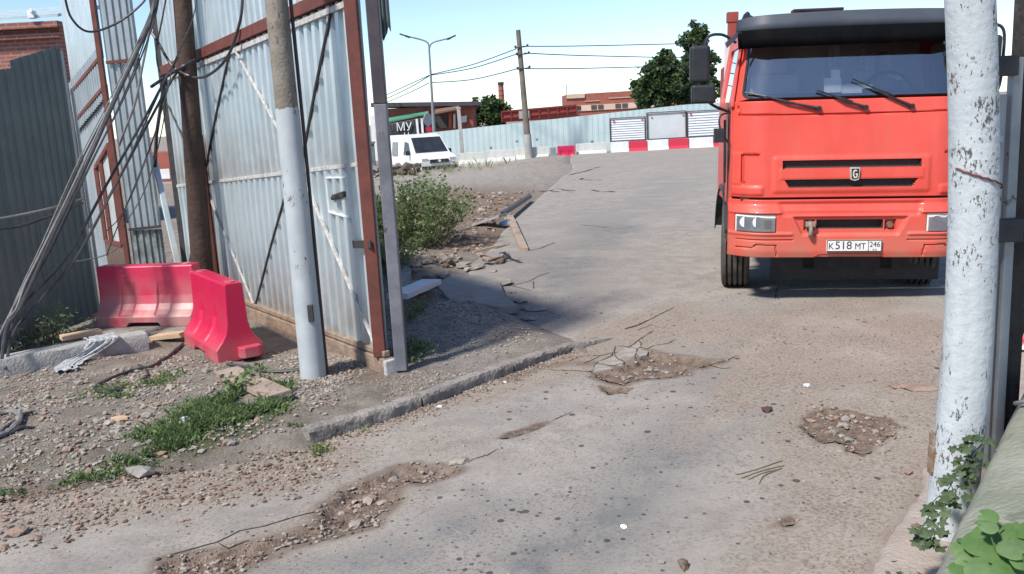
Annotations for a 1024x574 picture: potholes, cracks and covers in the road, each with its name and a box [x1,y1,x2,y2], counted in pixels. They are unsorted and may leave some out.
crack [572,308,674,368]
pothole [595,352,719,385]
pothole [499,422,550,438]
pothole [799,407,901,454]
pothole [320,466,456,536]
pothole [599,386,631,395]
crack [173,511,316,554]
crack [539,167,615,192]
